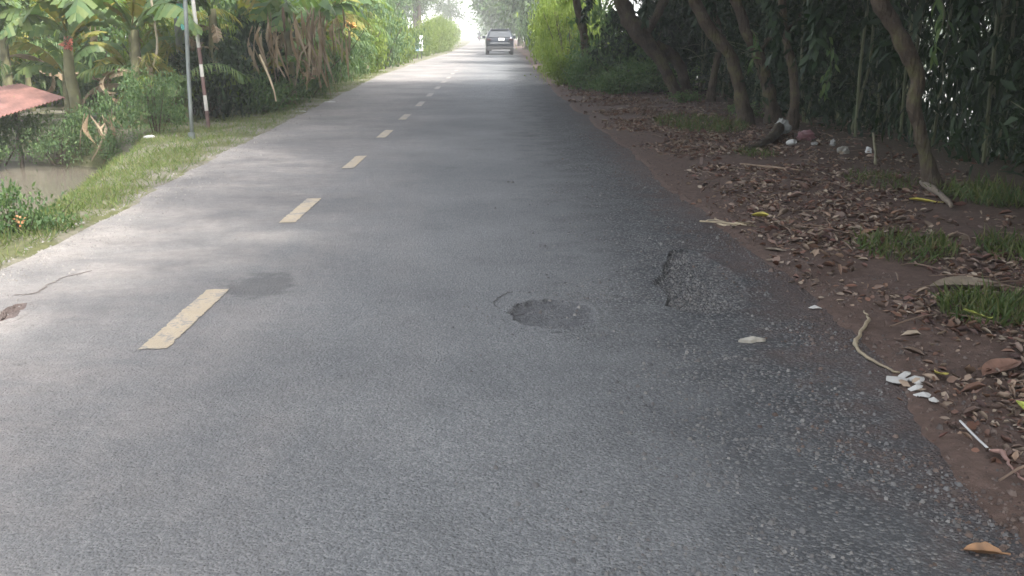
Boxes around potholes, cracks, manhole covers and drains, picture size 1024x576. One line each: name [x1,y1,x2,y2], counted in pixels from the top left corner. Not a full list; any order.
crack [15,270,92,295]
pothole [0,301,34,324]
pothole [498,297,606,332]
pothole [645,248,755,317]
